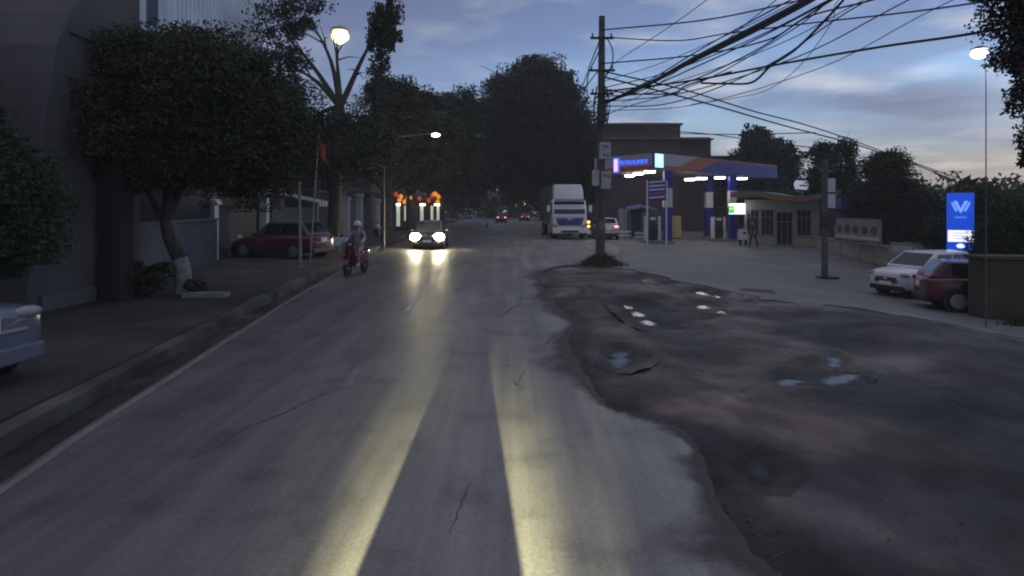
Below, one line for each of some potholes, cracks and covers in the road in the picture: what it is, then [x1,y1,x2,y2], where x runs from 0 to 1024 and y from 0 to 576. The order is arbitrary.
pothole [682,286,733,300]
crack [191,386,343,459]
pothole [736,442,819,507]
pothole [584,341,658,374]
crack [449,480,471,533]
pothole [605,299,735,331]
pothole [757,345,879,387]
